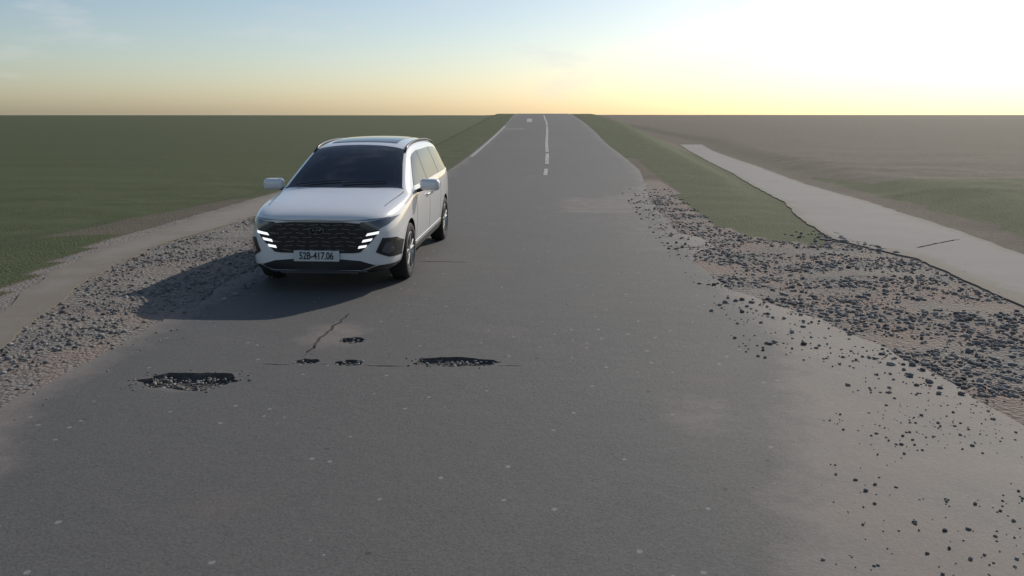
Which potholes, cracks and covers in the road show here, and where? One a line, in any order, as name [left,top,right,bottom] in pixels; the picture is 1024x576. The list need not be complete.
pothole [121,369,251,393]
pothole [406,357,502,368]
